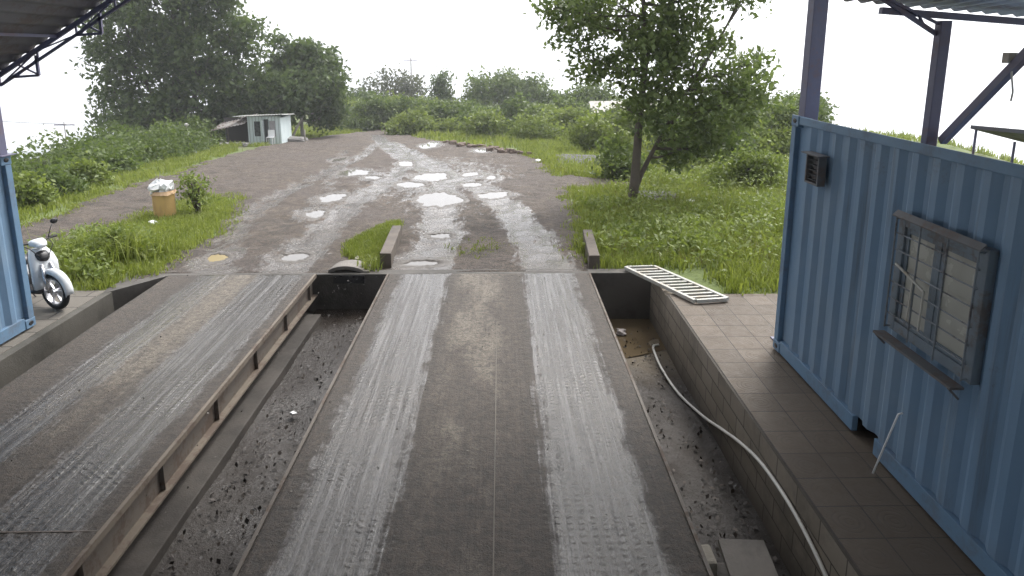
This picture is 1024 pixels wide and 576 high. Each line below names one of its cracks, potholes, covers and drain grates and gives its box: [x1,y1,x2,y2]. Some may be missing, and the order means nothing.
drain grate [624,265,729,303]
pothole [412,190,470,209]
pothole [274,251,317,263]
